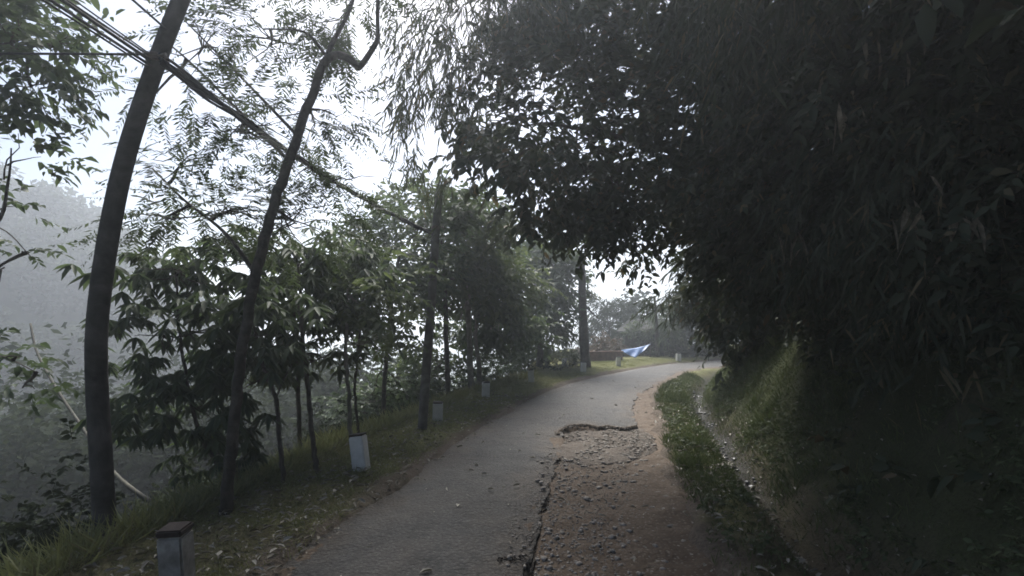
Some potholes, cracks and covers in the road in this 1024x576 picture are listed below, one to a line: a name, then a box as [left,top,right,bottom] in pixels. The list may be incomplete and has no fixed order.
crack [496,458,562,576]
pothole [552,423,656,469]
